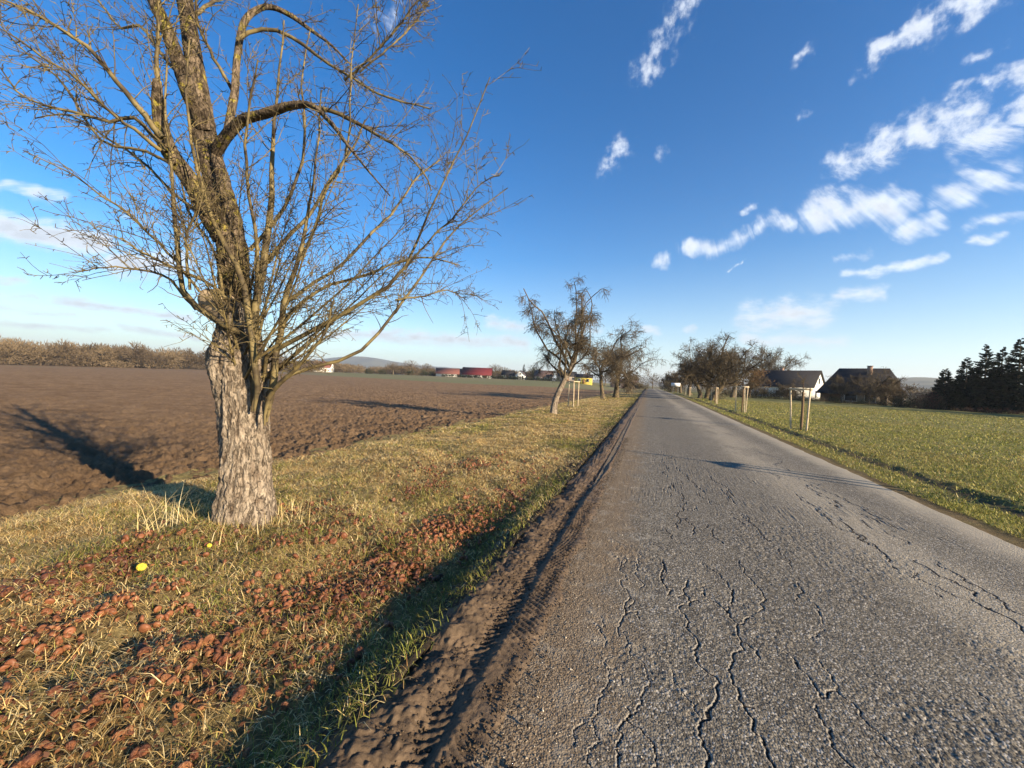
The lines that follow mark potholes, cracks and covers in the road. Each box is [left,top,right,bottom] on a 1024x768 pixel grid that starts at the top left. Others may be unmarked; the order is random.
crack [573,457,791,768]
crack [762,453,1024,633]
crack [785,652,941,767]
